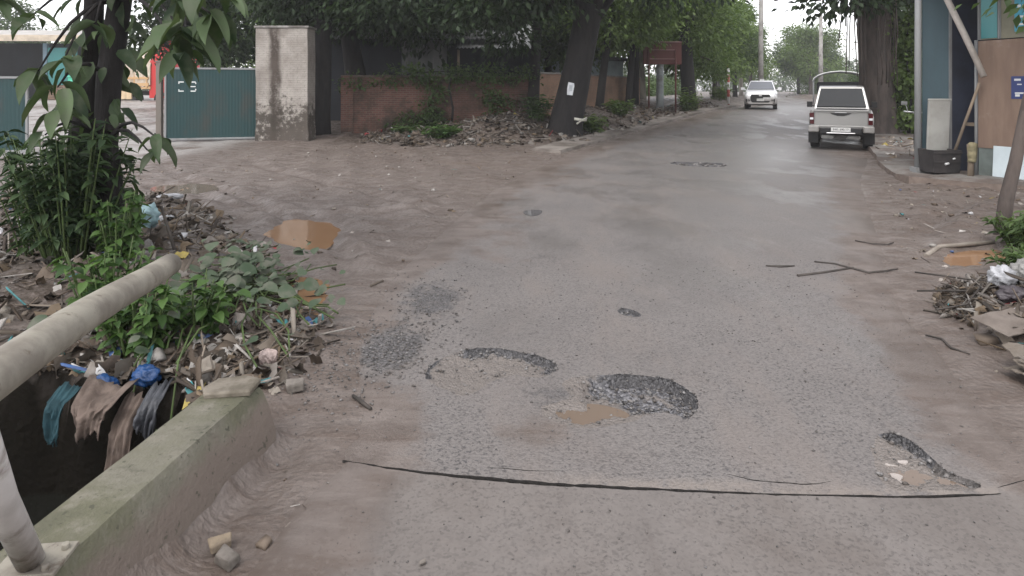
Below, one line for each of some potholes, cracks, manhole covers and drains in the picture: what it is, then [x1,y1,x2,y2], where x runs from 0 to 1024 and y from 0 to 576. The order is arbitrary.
pothole [541,373,699,428]
